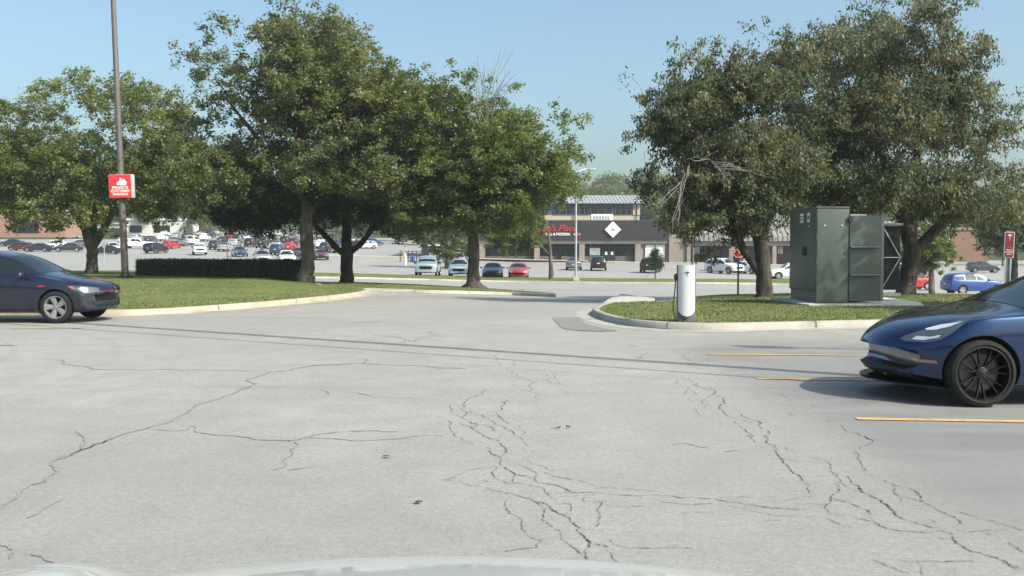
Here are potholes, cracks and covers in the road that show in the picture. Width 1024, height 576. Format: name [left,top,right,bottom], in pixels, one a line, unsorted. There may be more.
crack [0,358,452,563]
crack [443,353,1024,574]
